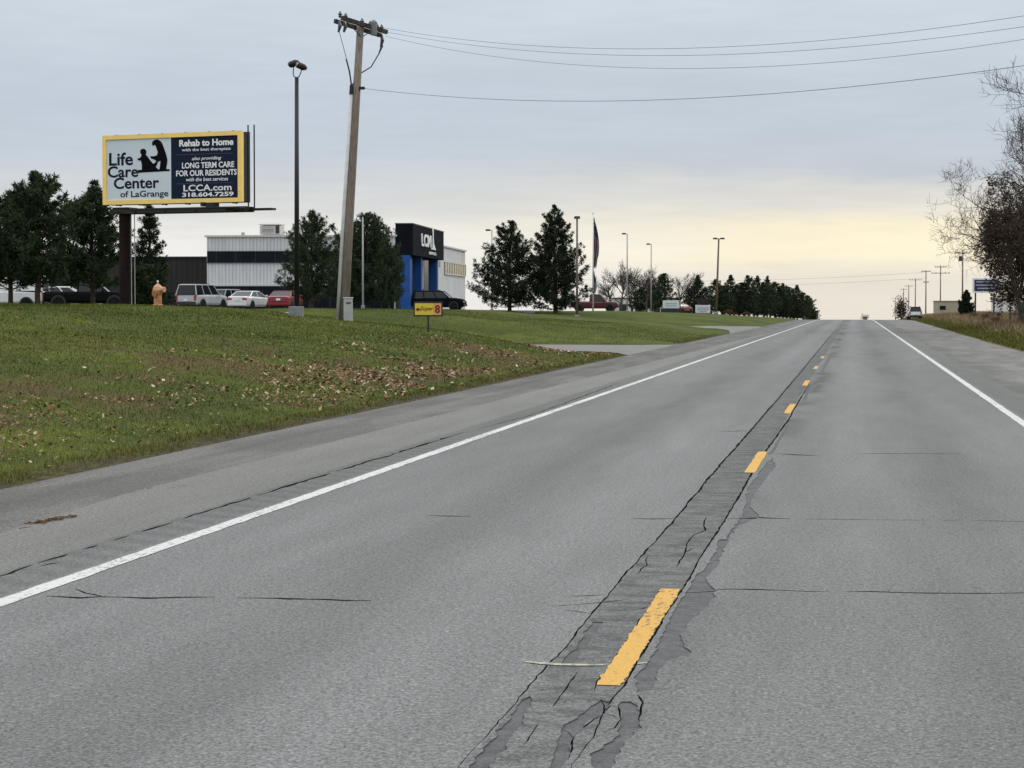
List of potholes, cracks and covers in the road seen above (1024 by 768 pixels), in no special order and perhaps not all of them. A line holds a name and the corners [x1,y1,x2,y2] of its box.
crack [50,589,372,601]
crack [525,383,1005,768]
